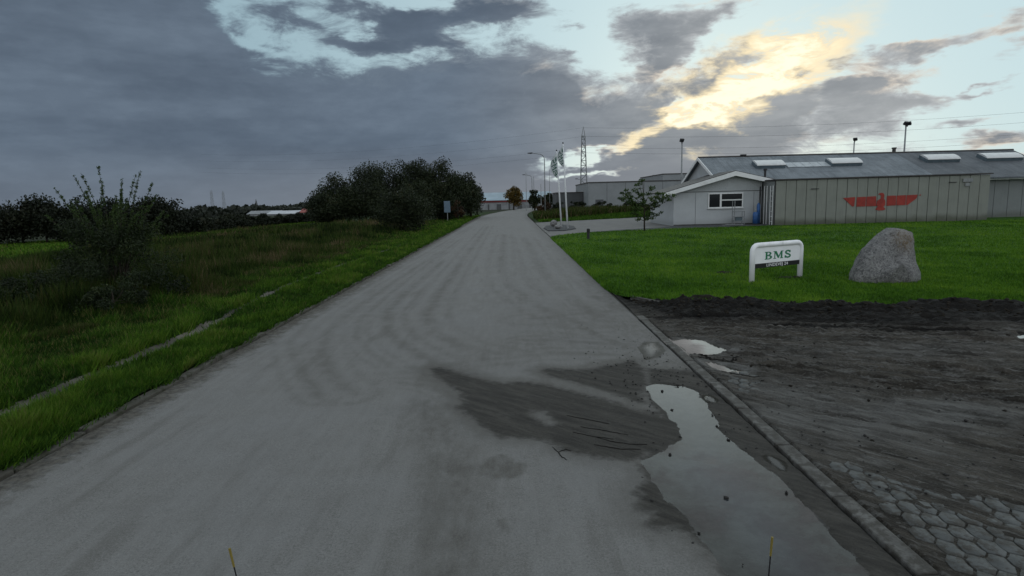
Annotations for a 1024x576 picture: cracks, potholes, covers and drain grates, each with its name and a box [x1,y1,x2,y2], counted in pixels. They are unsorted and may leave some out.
crack [554,415,647,460]
